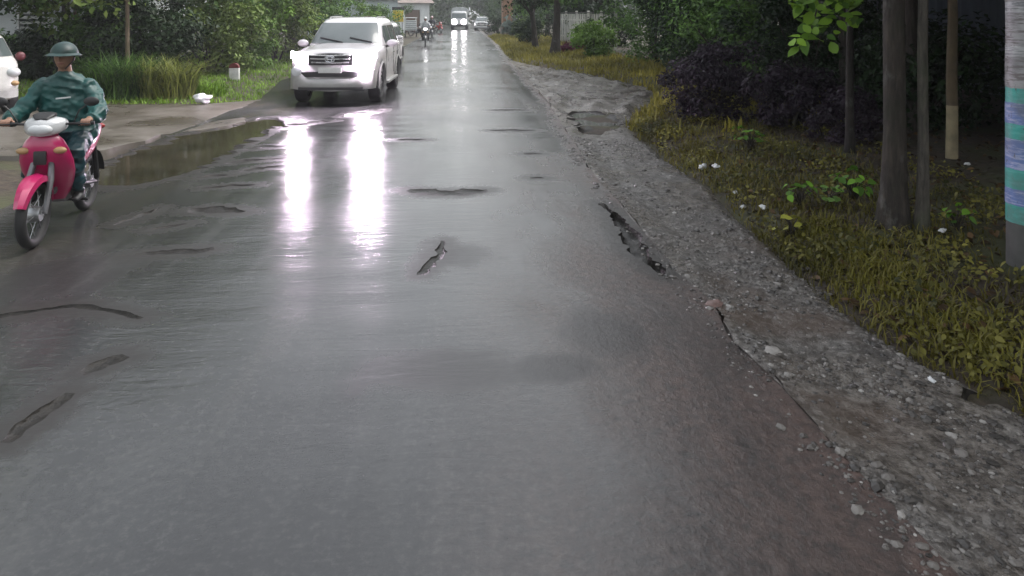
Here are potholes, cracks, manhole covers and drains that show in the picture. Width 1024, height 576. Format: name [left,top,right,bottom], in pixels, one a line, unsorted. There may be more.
crack [0,304,144,320]
pothole [566,111,624,135]
pothole [406,188,488,196]
pothole [0,393,75,443]
pothole [79,354,129,375]
pothole [417,241,447,275]
pothole [186,206,245,214]
pothole [135,247,214,256]
pothole [598,203,666,276]
